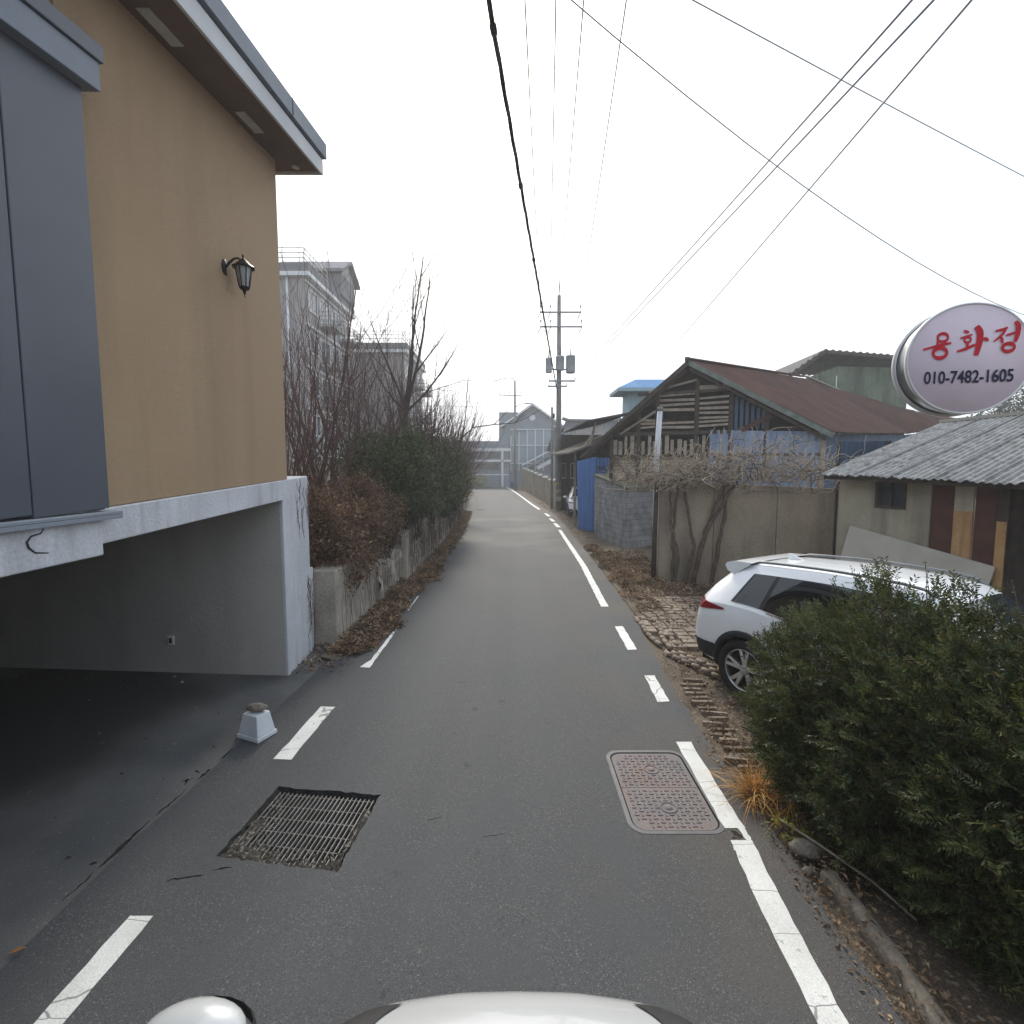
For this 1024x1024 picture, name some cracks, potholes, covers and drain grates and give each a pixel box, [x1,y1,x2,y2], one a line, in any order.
drain grate [217,786,381,872]
crack [165,867,232,882]
manhole cover [606,750,725,834]
